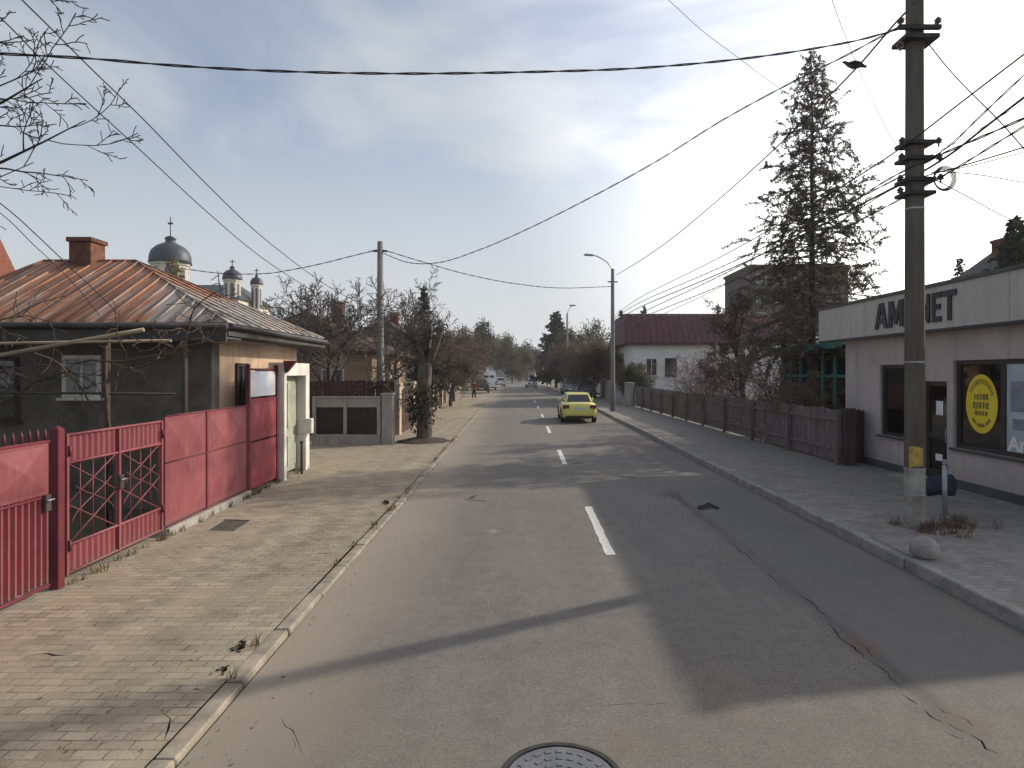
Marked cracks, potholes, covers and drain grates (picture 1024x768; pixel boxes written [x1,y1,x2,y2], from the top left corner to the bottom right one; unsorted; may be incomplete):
crack [905,696,995,755]
utility cover [204,519,253,532]
crack [163,688,201,739]
manhole cover [501,742,619,768]
